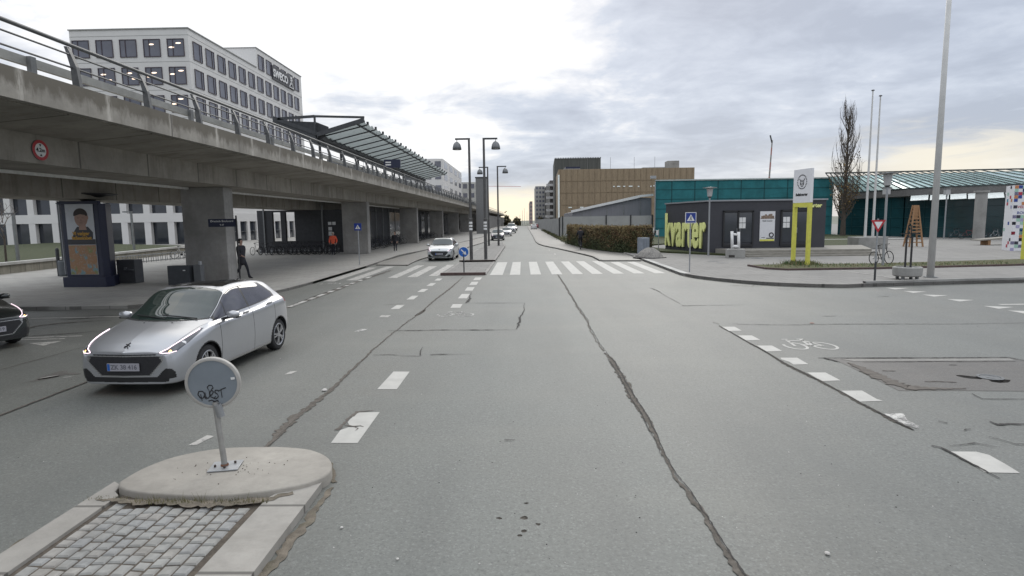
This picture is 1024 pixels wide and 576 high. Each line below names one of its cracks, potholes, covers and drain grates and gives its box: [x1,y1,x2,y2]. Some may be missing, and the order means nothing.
crack [264,277,472,447]
